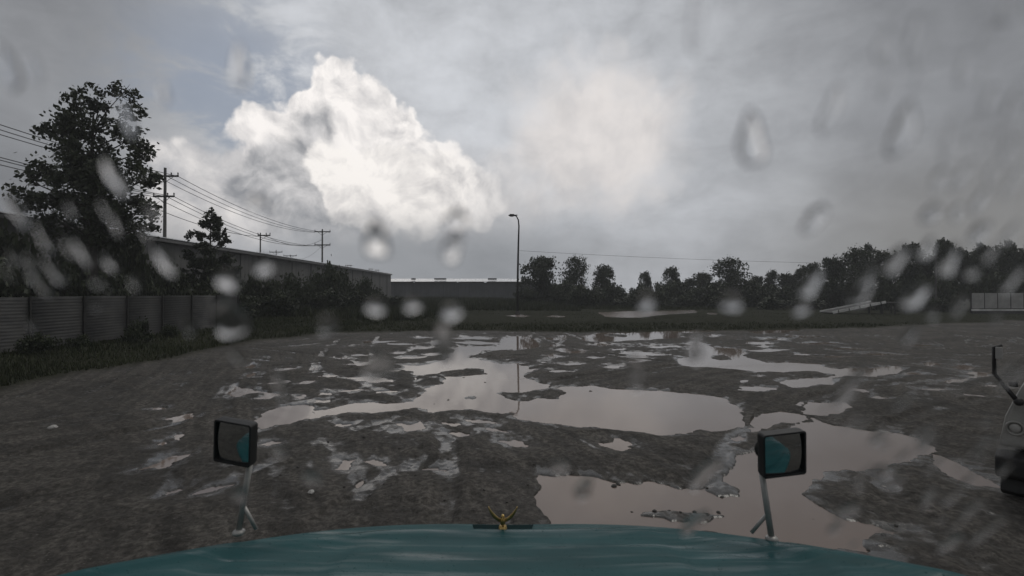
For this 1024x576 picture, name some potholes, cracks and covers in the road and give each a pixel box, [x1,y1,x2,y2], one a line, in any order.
pothole [291,377,323,385]
pothole [313,334,765,443]
pothole [231,399,324,437]
pothole [860,392,899,400]
pothole [304,396,339,406]
pothole [121,448,203,473]
pothole [778,395,873,418]
pothole [570,328,694,343]
pothole [290,392,312,401]
